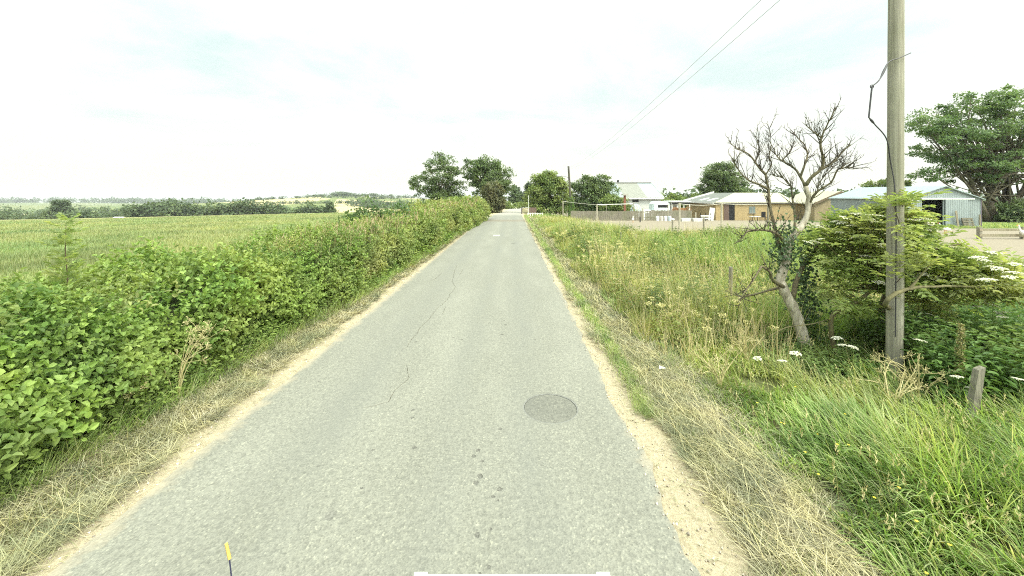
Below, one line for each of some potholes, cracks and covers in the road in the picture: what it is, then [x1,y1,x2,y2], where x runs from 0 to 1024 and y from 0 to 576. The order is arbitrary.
manhole cover [523,394,578,424]
